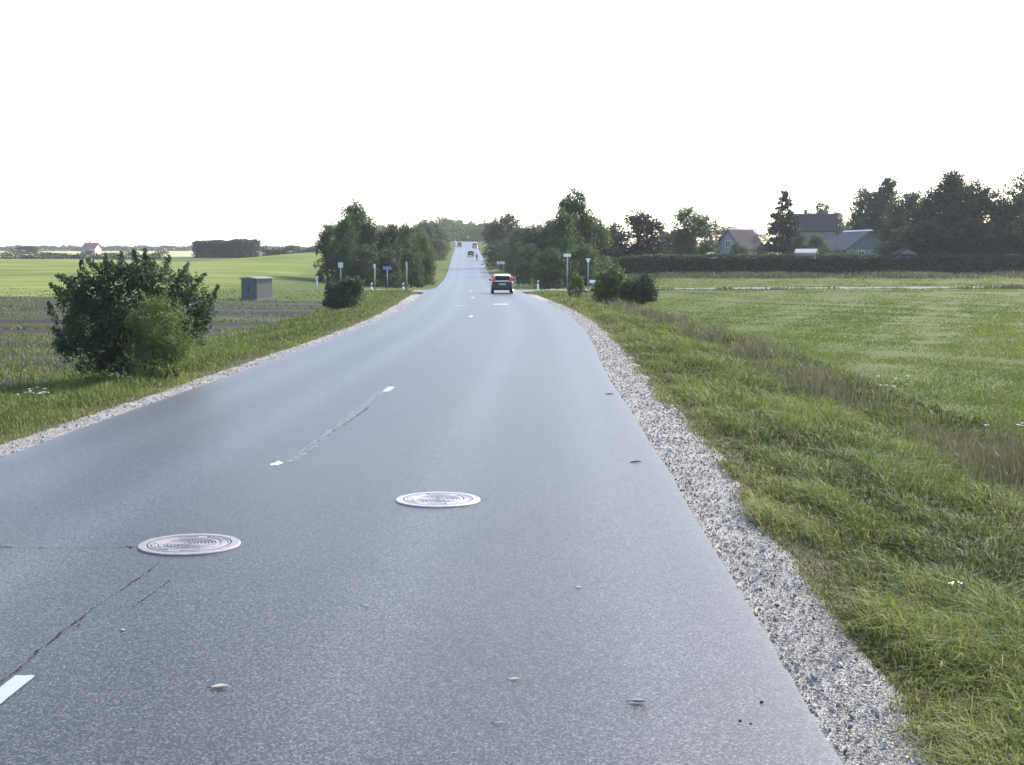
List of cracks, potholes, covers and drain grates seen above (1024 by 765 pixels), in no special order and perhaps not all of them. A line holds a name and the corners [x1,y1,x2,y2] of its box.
manhole cover [137,533,241,556]
manhole cover [395,492,480,508]
crack [0,561,171,684]
